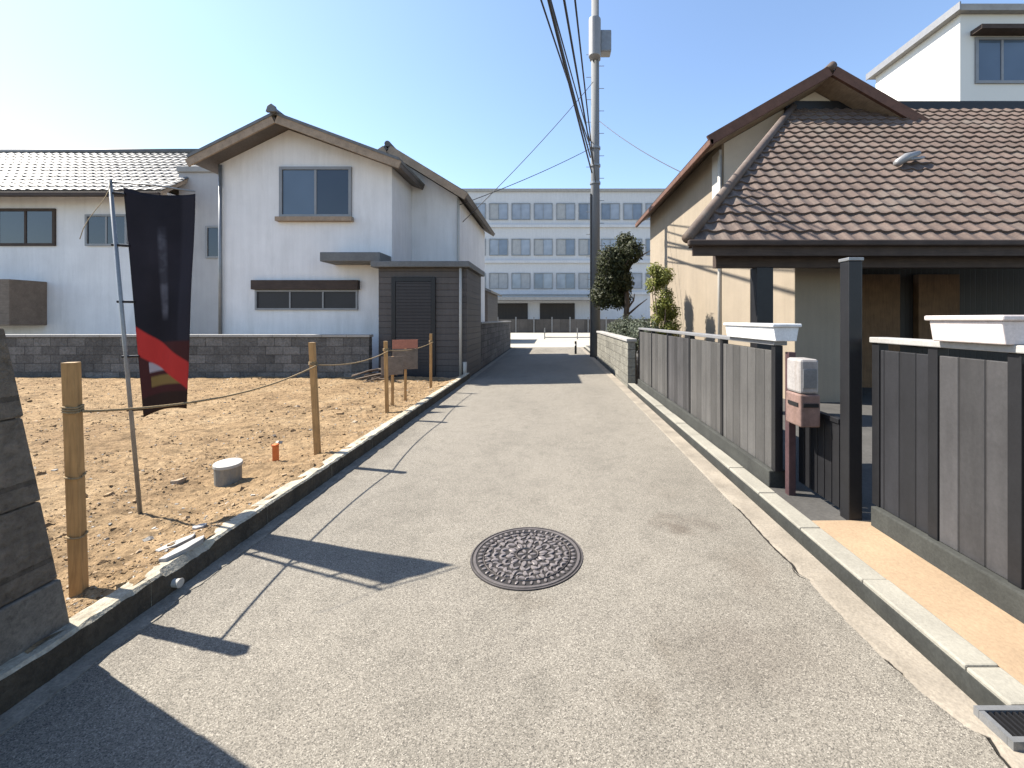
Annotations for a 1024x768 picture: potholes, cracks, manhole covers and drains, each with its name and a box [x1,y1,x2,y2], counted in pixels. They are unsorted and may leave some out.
manhole cover [470,527,583,591]
crack [733,505,805,579]
drain grate [973,705,1024,752]
crack [984,736,1011,768]
